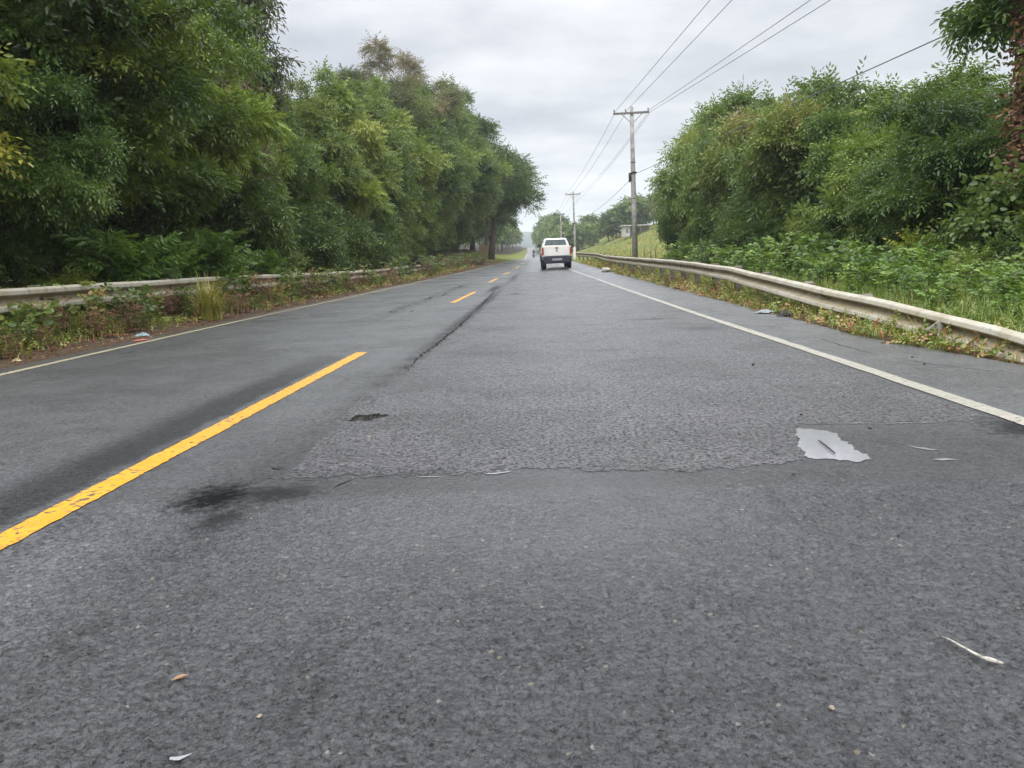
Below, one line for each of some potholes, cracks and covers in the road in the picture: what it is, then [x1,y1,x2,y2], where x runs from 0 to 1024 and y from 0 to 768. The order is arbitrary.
crack [390,286,494,376]
pothole [347,413,389,422]
